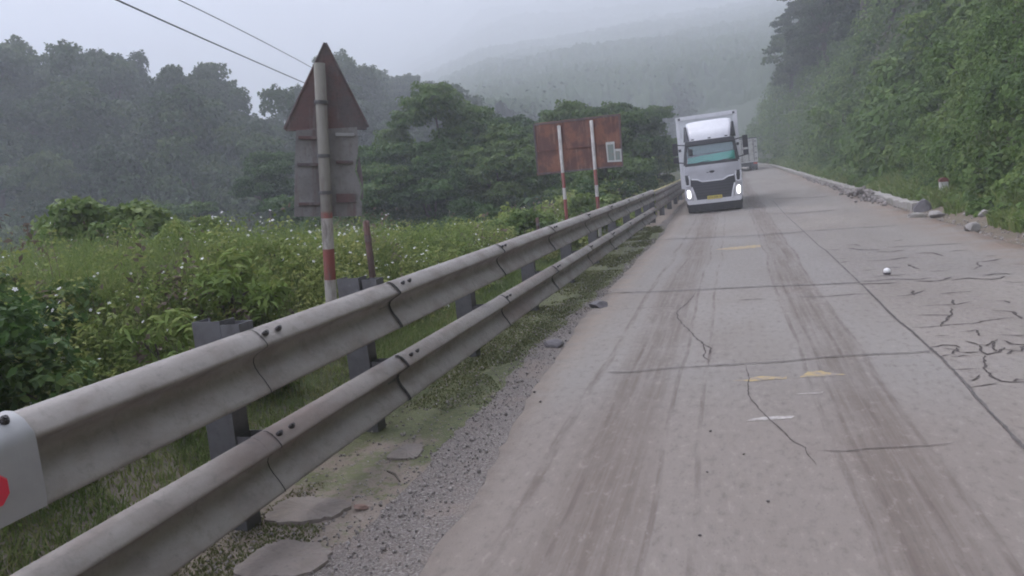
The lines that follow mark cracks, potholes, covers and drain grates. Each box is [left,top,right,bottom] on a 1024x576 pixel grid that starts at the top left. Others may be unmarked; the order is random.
crack [746,368,947,464]
crack [815,225,1024,387]
crack [631,292,712,366]
